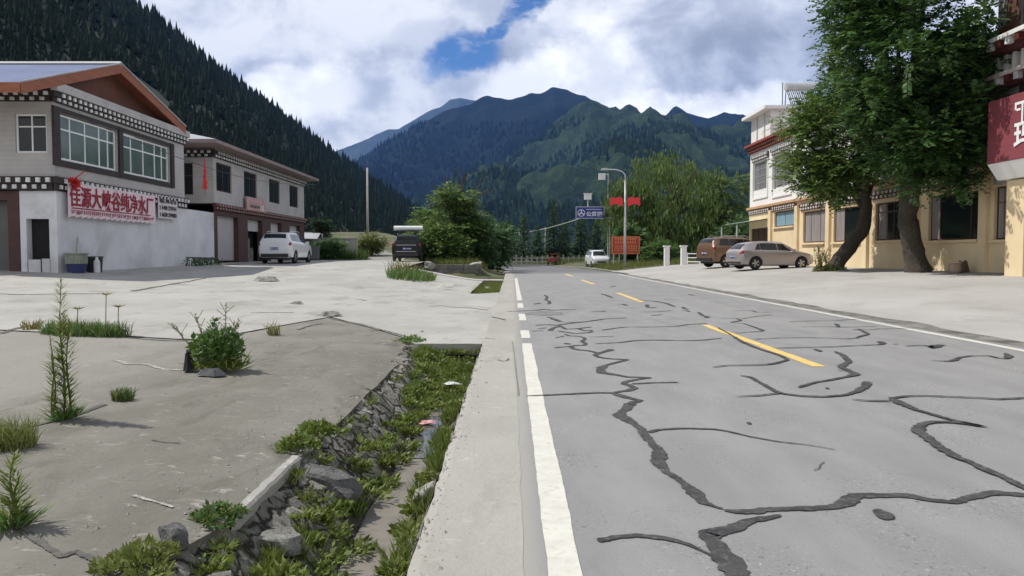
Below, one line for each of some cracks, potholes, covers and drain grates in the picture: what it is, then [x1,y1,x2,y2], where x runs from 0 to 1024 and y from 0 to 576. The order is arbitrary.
crack [647,427,836,470]
crack [524,286,1024,401]
